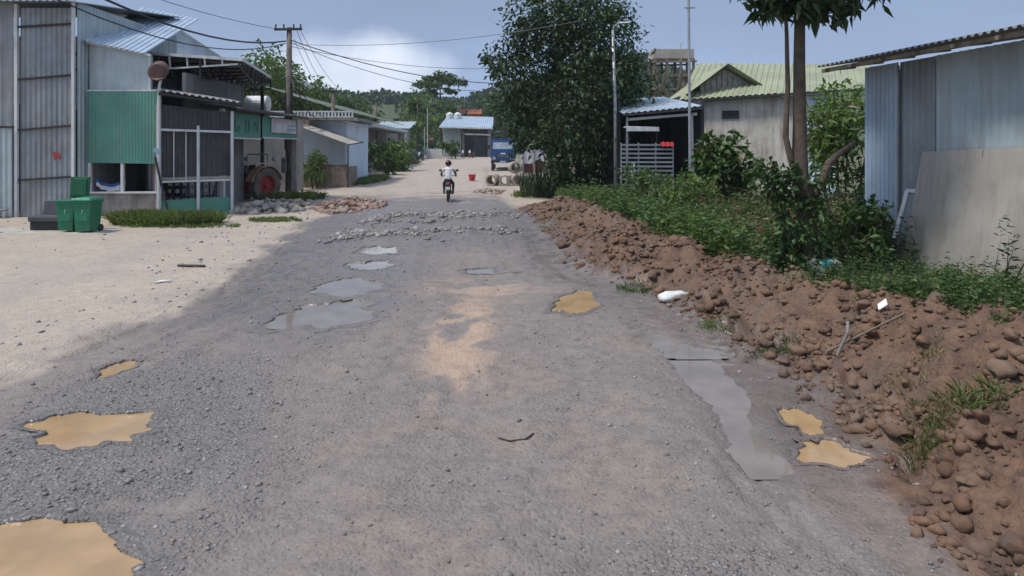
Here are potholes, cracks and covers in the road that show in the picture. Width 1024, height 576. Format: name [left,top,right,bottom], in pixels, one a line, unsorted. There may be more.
pothole [296,275,396,301]
pothole [348,244,407,255]
pothole [0,508,174,576]
pothole [339,258,401,271]
pothole [245,296,386,333]
pothole [545,287,605,317]
pothole [92,356,143,382]
pothole [459,267,522,275]
pothole [6,407,174,455]
pothole [772,404,830,442]
pothole [786,434,879,471]
